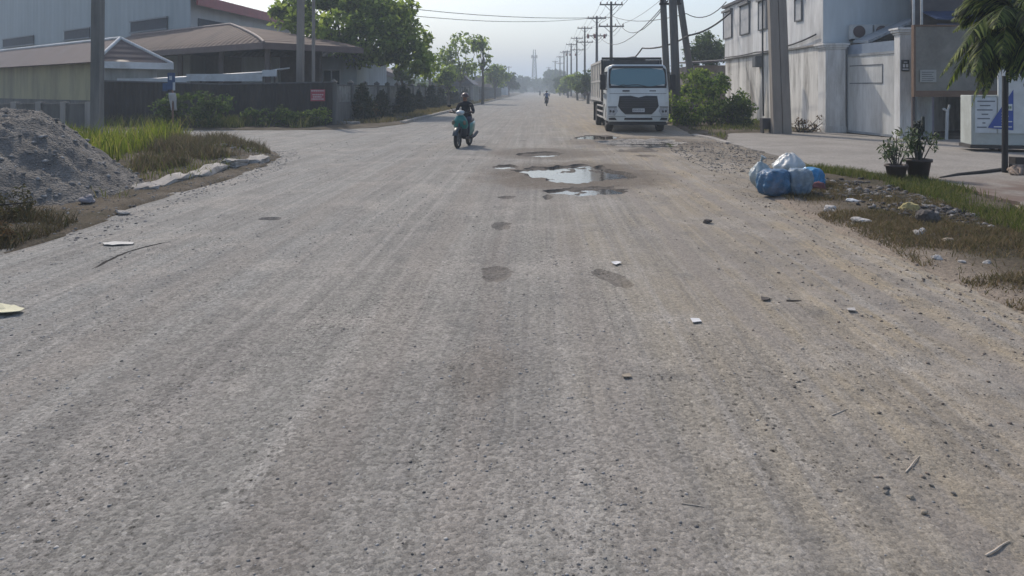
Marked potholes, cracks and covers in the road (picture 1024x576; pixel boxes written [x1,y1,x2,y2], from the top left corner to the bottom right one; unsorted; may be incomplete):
pothole [543,186,628,196]
pothole [510,164,638,184]
